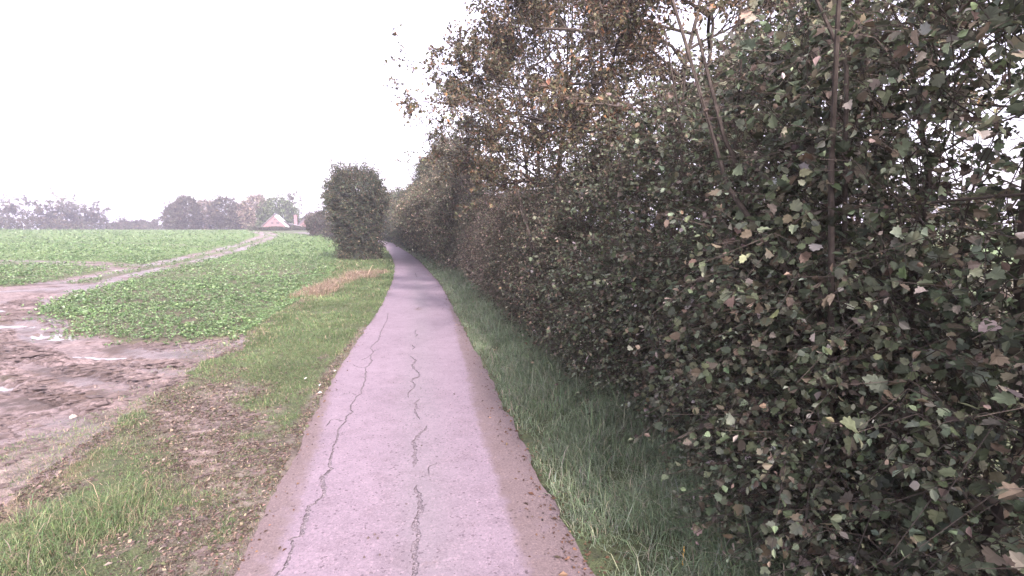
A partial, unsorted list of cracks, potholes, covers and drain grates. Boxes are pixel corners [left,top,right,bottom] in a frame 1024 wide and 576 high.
crack [407,330,439,576]
crack [274,315,388,576]
